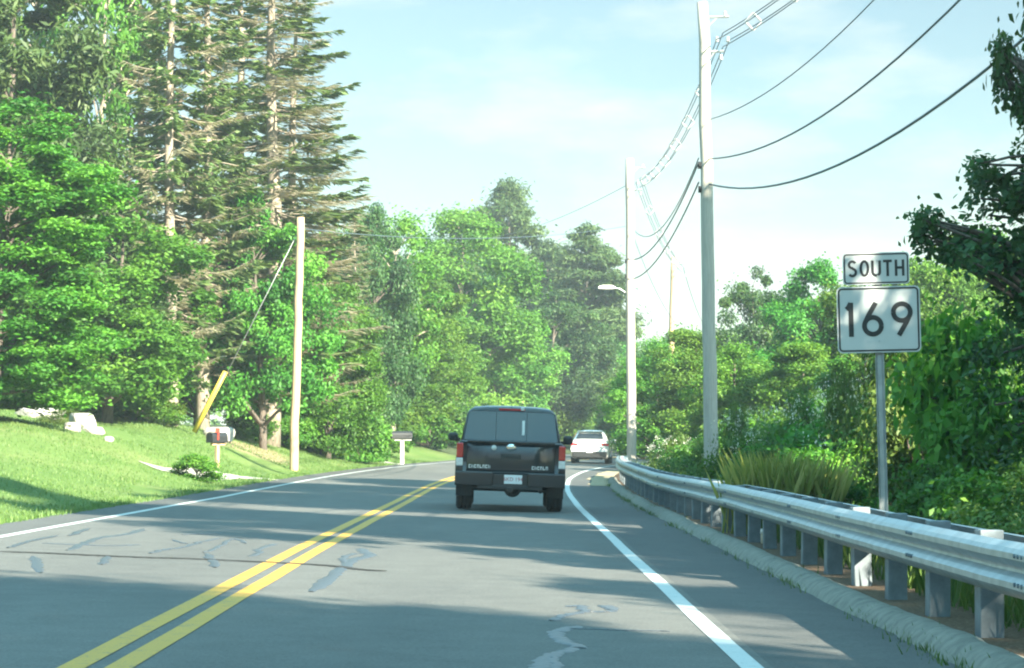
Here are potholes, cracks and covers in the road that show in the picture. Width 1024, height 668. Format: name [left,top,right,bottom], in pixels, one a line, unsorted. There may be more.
crack [0,551,387,571]
